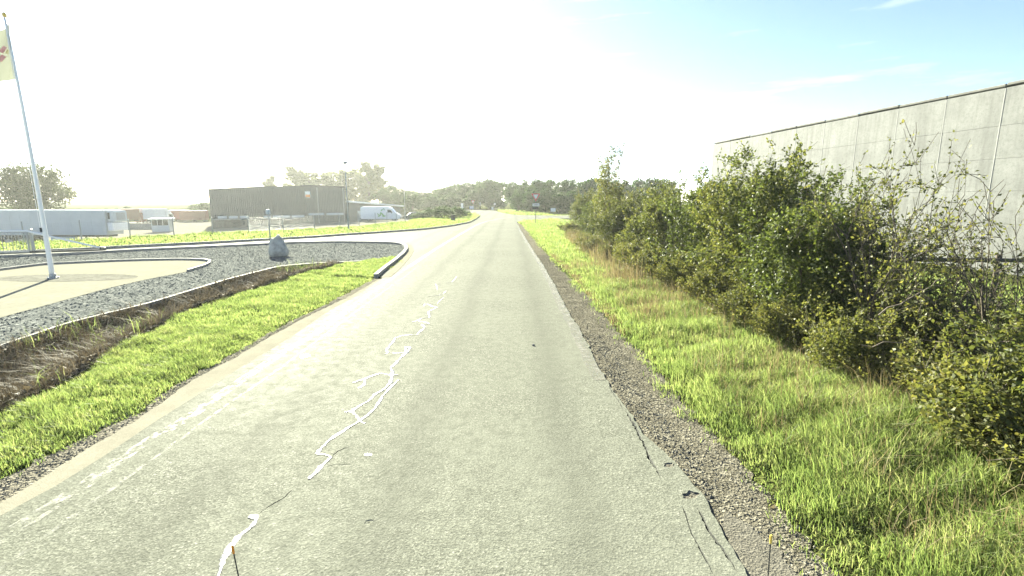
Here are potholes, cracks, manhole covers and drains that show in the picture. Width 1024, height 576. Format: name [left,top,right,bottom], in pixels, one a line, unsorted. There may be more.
crack [682,506,735,572]
